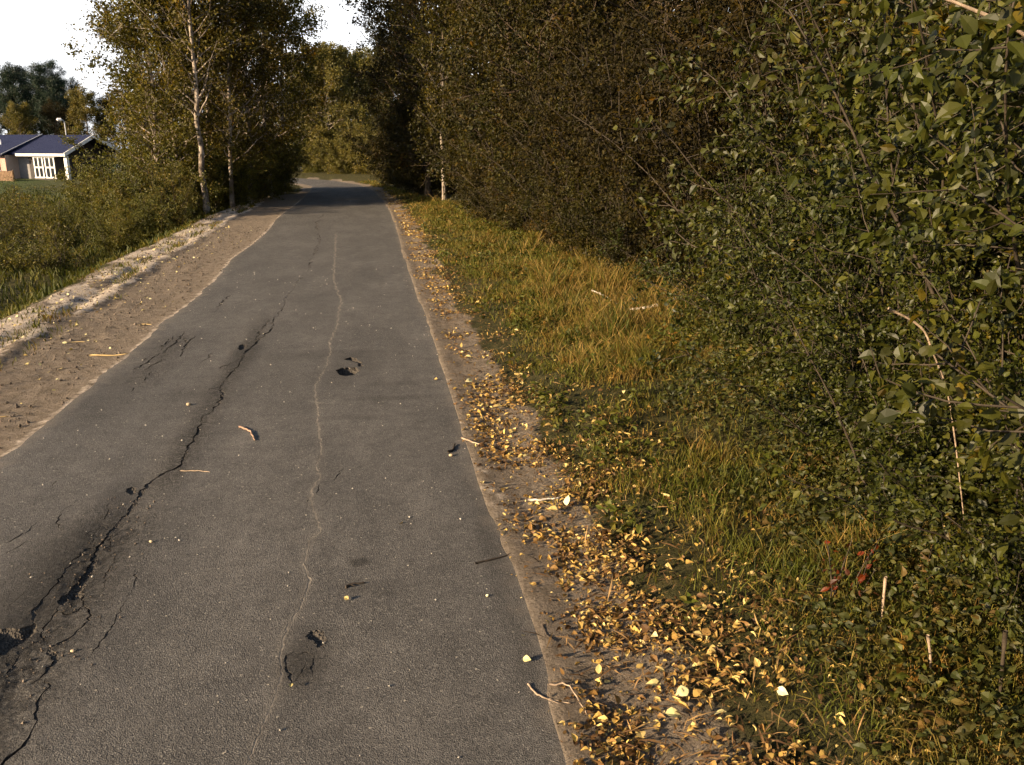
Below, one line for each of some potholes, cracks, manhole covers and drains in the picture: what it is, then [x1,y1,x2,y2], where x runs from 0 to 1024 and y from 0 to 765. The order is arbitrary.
pothole [305,630,327,648]
crack [1,215,342,765]
pothole [0,624,37,655]
